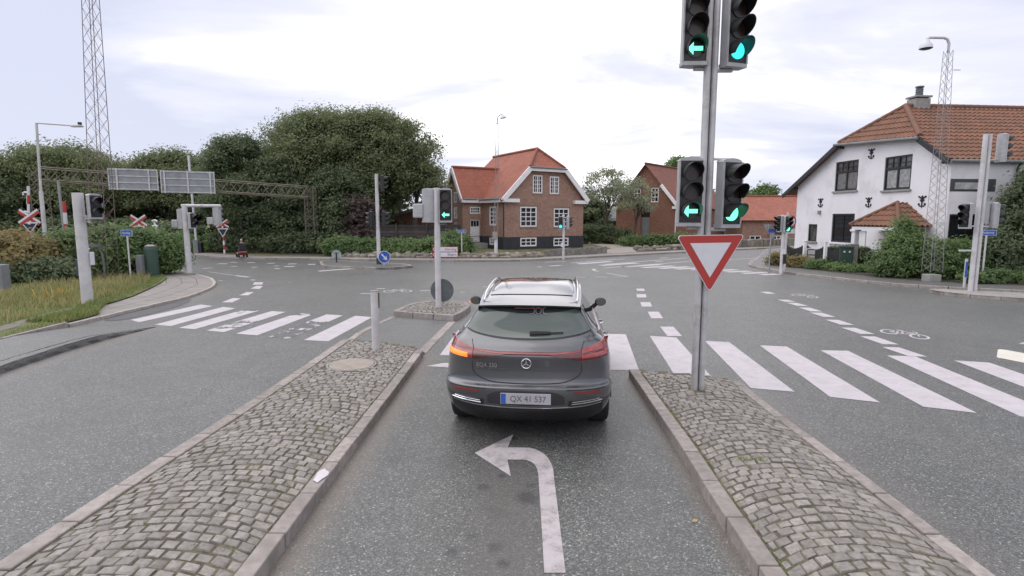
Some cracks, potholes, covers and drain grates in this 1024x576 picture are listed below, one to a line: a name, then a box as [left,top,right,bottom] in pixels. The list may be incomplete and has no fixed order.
manhole cover [326,358,377,371]
